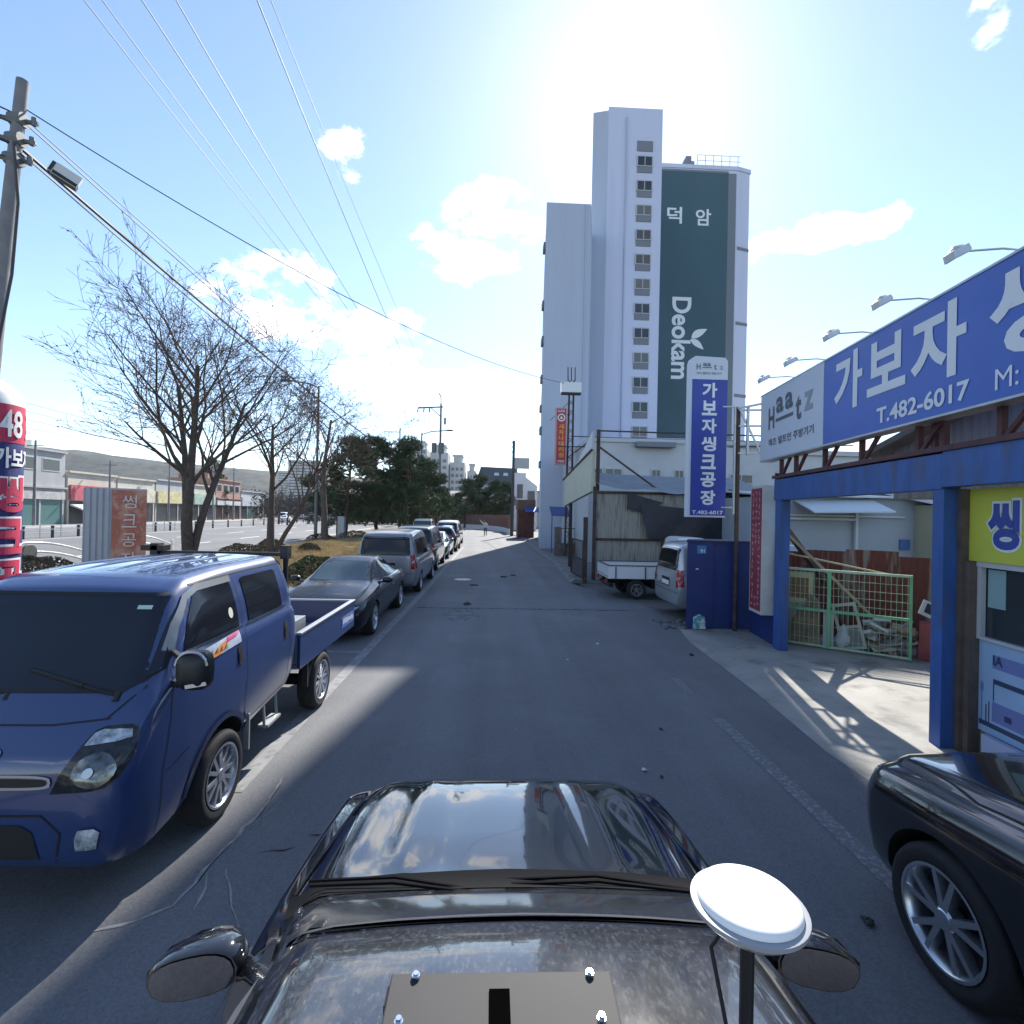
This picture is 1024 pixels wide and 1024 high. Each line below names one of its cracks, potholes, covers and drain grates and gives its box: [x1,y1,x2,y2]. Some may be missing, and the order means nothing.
crack [91,778,321,932]
